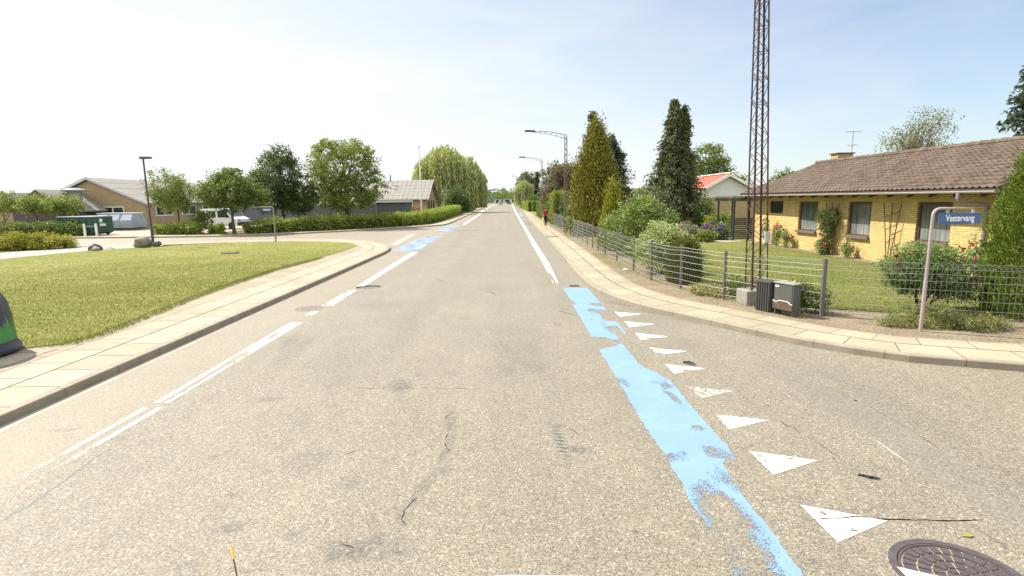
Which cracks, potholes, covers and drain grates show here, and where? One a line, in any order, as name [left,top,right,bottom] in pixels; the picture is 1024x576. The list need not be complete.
manhole cover [888,539,1023,576]
crack [401,413,453,526]
